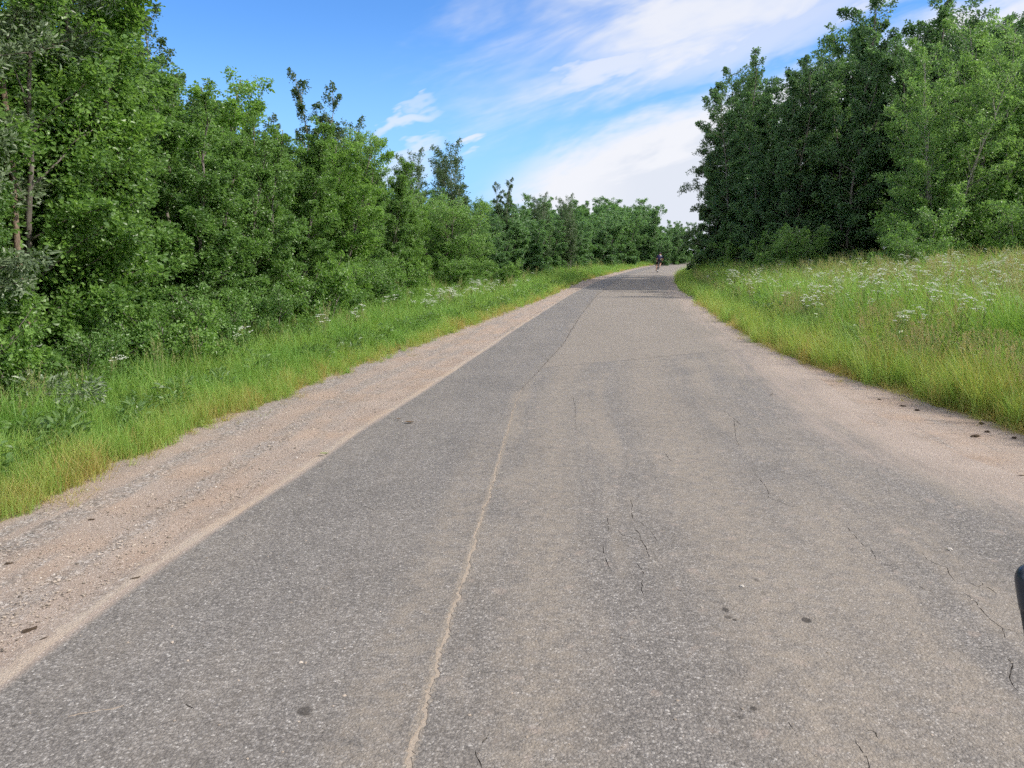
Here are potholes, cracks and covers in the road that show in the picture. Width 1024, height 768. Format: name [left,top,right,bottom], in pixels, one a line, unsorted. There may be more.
crack [922,553,1013,637]
crack [405,388,523,768]
crack [602,500,657,596]
